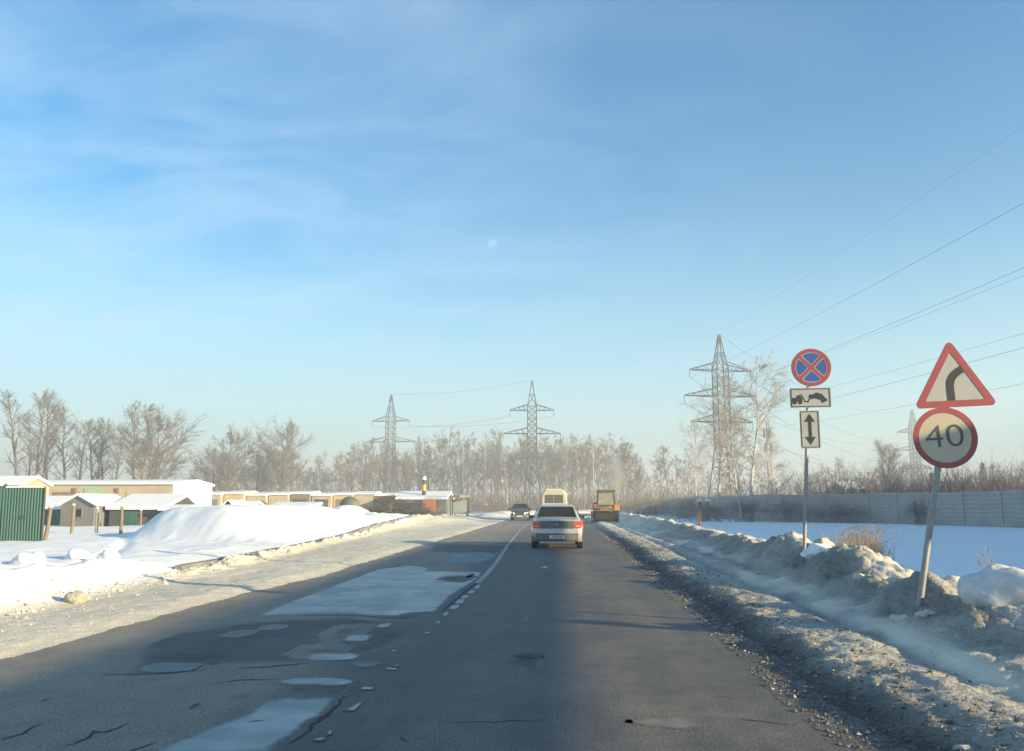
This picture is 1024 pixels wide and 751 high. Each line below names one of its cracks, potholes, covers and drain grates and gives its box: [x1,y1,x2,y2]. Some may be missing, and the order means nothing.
crack [66,723,155,751]
pothole [510,653,542,668]
crack [290,696,344,743]
pothole [436,575,477,583]
